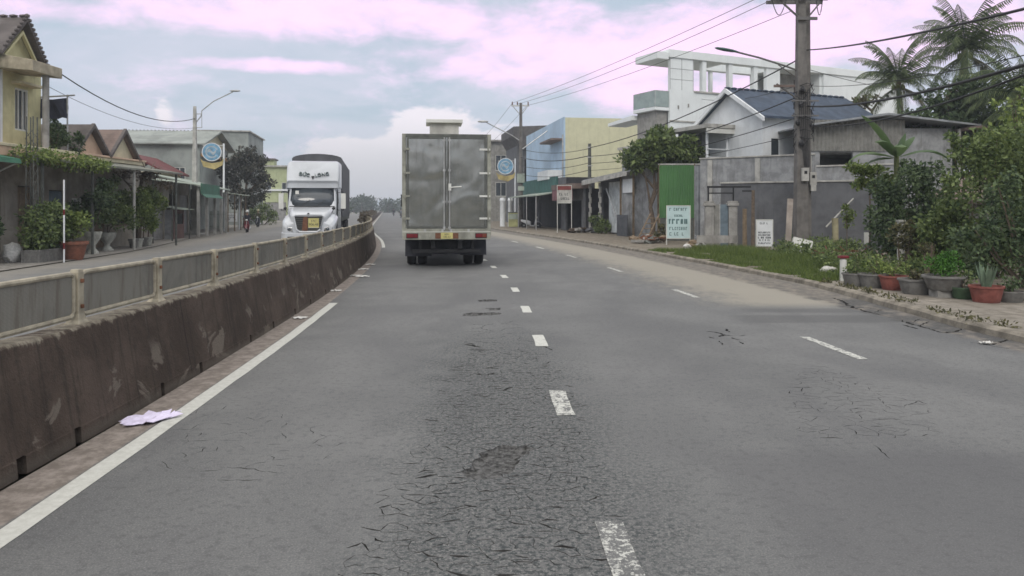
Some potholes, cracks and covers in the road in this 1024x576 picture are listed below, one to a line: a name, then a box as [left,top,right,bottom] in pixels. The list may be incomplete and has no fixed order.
crack [338,321,622,576]
crack [783,368,937,458]
pothole [462,445,535,480]
crack [901,319,962,333]
crack [833,298,883,316]
crack [163,406,344,481]
